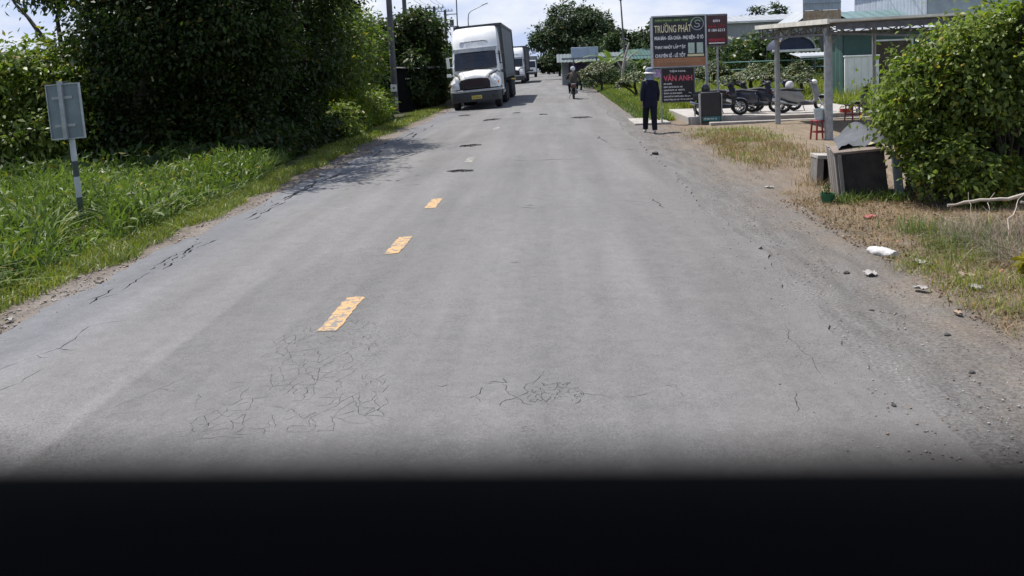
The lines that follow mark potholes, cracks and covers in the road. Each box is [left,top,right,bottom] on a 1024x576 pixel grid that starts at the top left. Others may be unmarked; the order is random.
crack [91,240,215,303]
crack [468,371,615,405]
crack [249,125,433,221]
